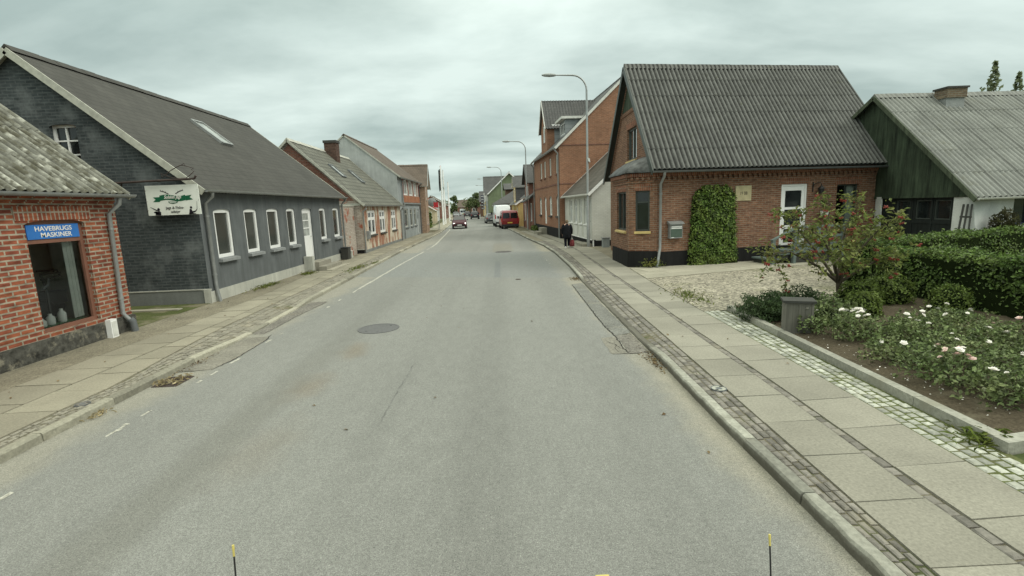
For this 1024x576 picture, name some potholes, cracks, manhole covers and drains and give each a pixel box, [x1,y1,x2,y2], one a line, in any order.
drain grate [151,376,194,388]
manhole cover [357,323,399,334]
crack [380,363,415,423]
